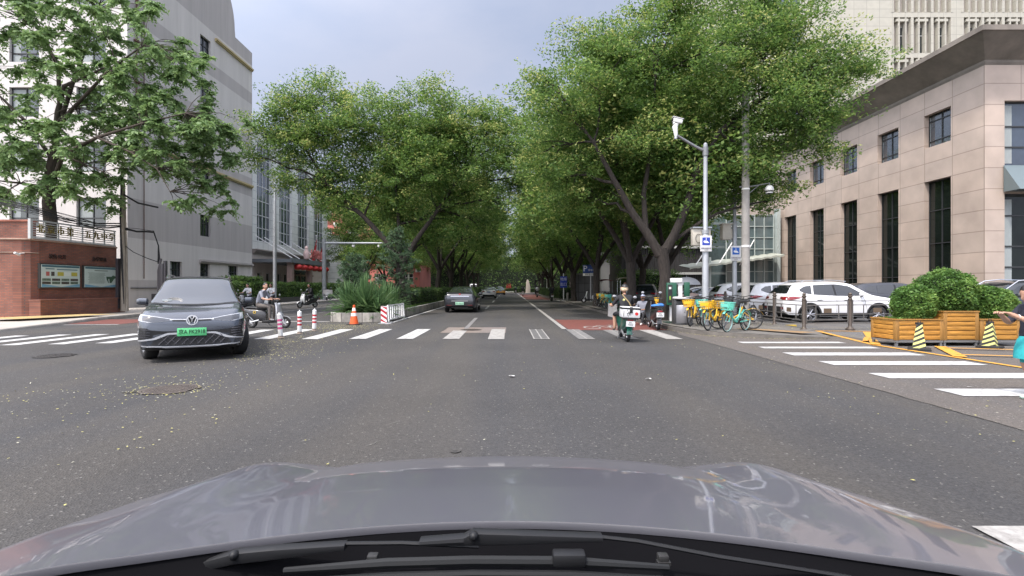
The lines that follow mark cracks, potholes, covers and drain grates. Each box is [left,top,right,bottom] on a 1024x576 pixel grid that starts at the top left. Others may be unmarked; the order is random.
manhole cover [138,384,201,394]
